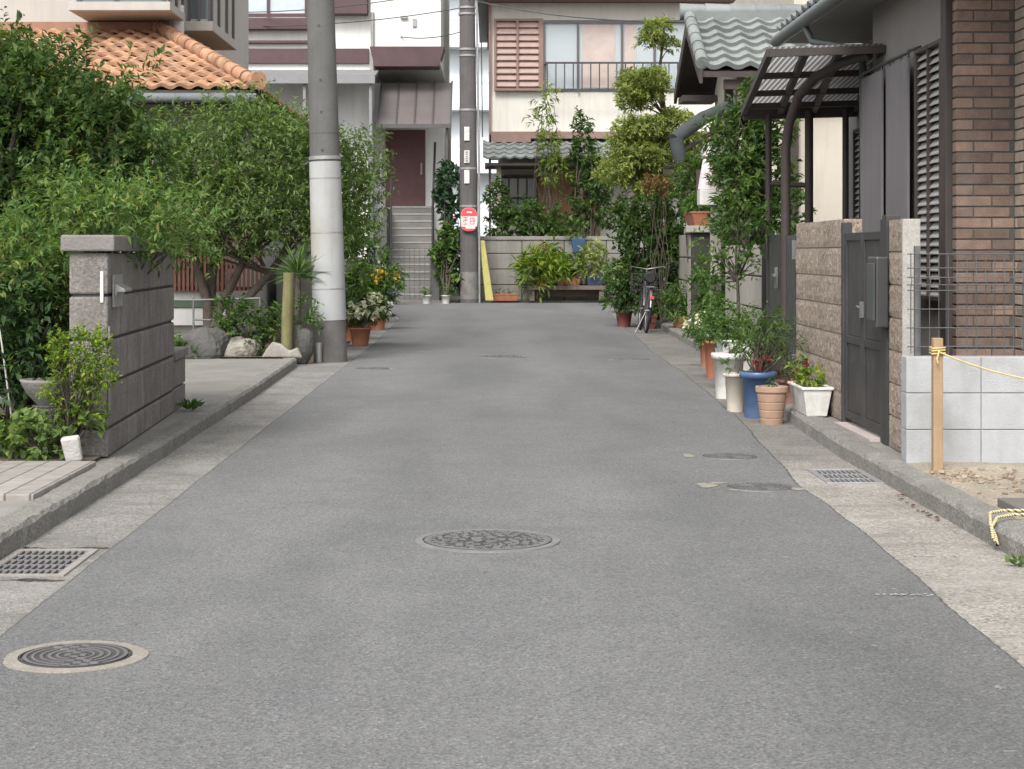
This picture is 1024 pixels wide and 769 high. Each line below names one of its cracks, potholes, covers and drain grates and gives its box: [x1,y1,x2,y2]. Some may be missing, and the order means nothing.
manhole cover [697,482,806,492]
manhole cover [3,640,149,673]
manhole cover [415,529,560,553]
drain grate [806,468,885,484]
drain grate [0,549,98,577]
